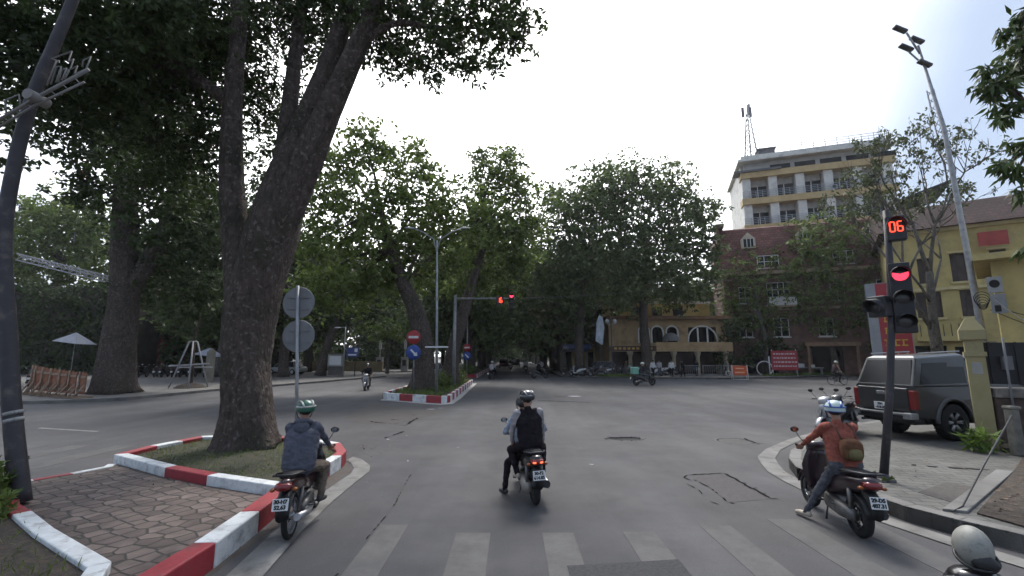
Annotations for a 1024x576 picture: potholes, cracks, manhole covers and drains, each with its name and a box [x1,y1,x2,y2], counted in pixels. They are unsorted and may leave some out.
crack [683,473,777,504]
